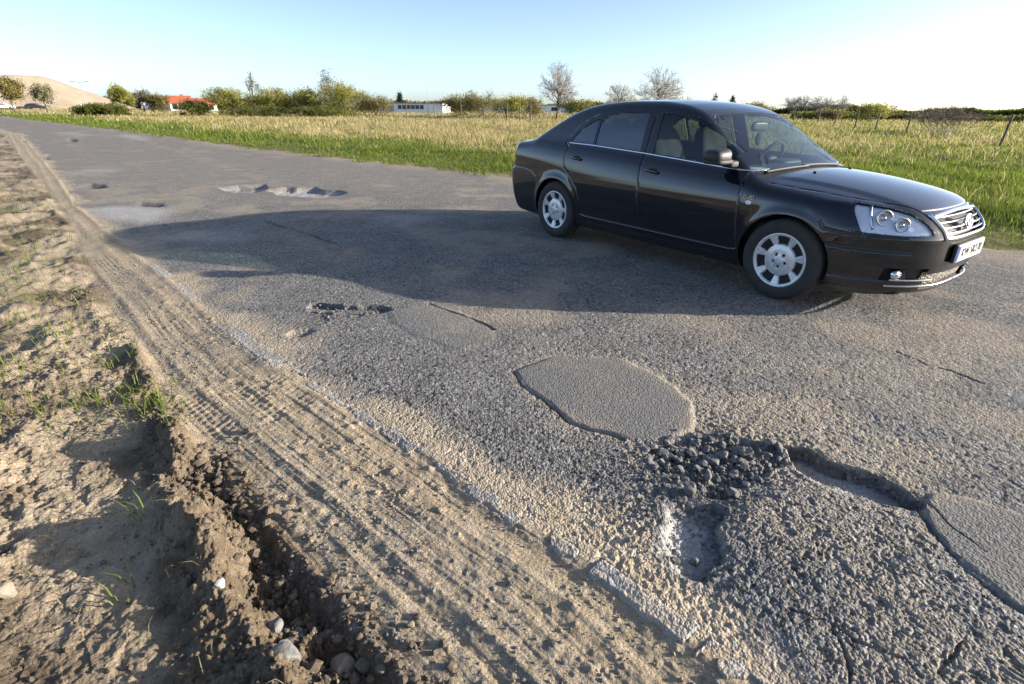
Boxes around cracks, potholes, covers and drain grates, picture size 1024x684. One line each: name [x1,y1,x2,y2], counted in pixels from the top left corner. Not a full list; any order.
pothole [649,499,730,586]
pothole [641,434,789,502]
crack [894,350,985,384]
pothole [782,444,928,514]
crack [785,502,1024,684]
pothole [217,183,270,193]
pothole [303,302,393,324]
crack [427,303,497,330]
pothole [264,186,349,198]
